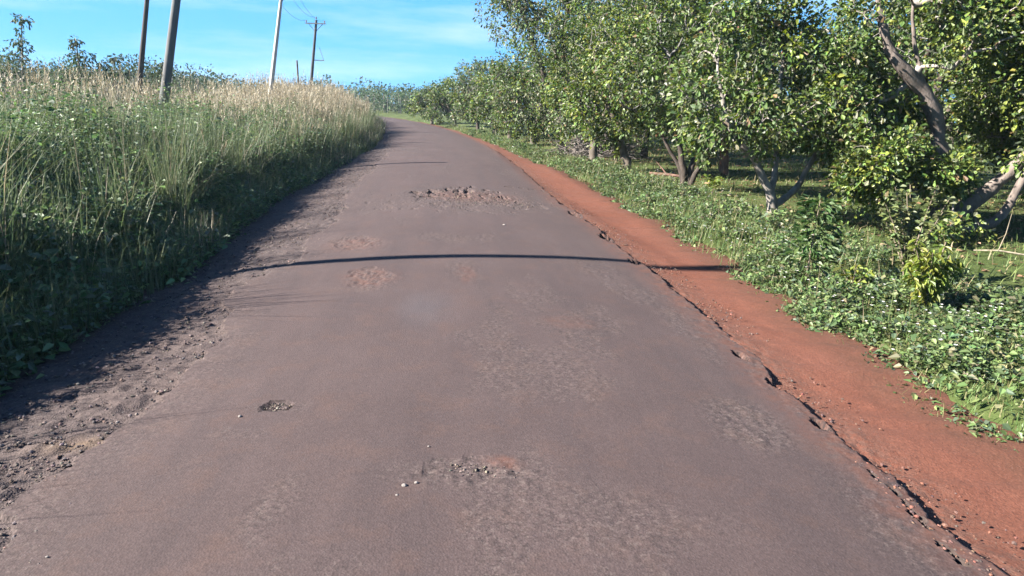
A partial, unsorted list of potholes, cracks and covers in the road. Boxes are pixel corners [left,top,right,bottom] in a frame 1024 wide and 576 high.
pothole [328,235,380,251]
pothole [346,265,406,288]
crack [866,469,975,568]
pothole [364,185,553,215]
pothole [257,400,296,412]
pothole [420,453,532,486]
